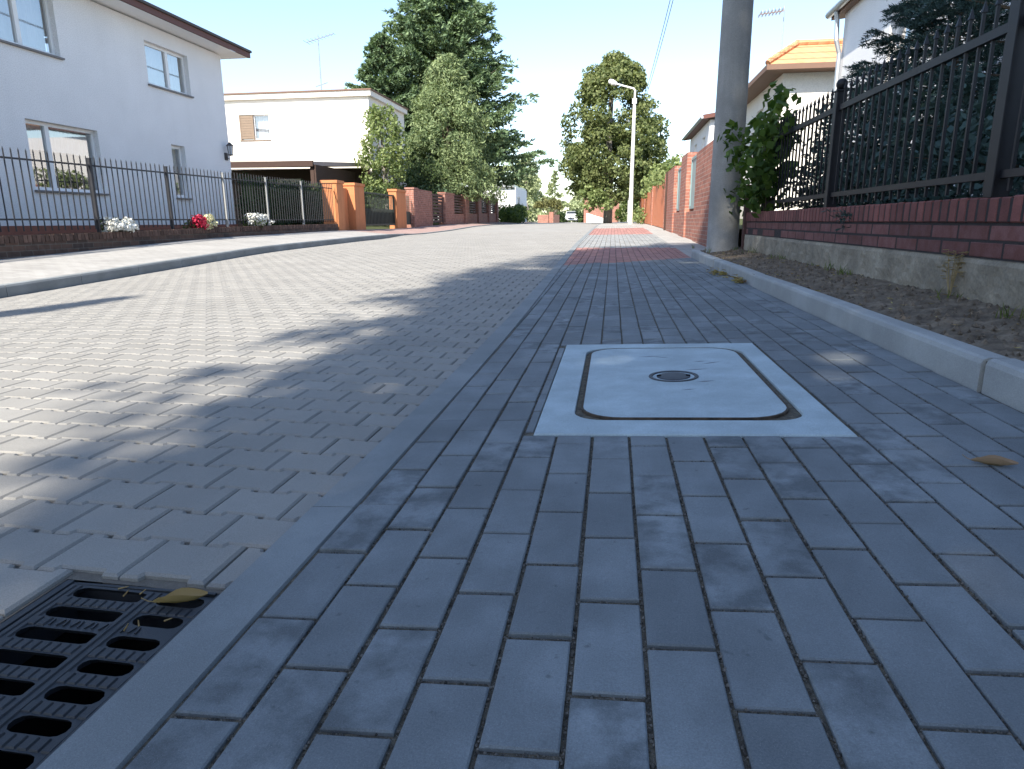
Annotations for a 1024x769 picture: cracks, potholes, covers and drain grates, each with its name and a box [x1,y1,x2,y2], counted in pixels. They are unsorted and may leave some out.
drain grate [0,580,219,769]
manhole cover [533,343,858,438]
